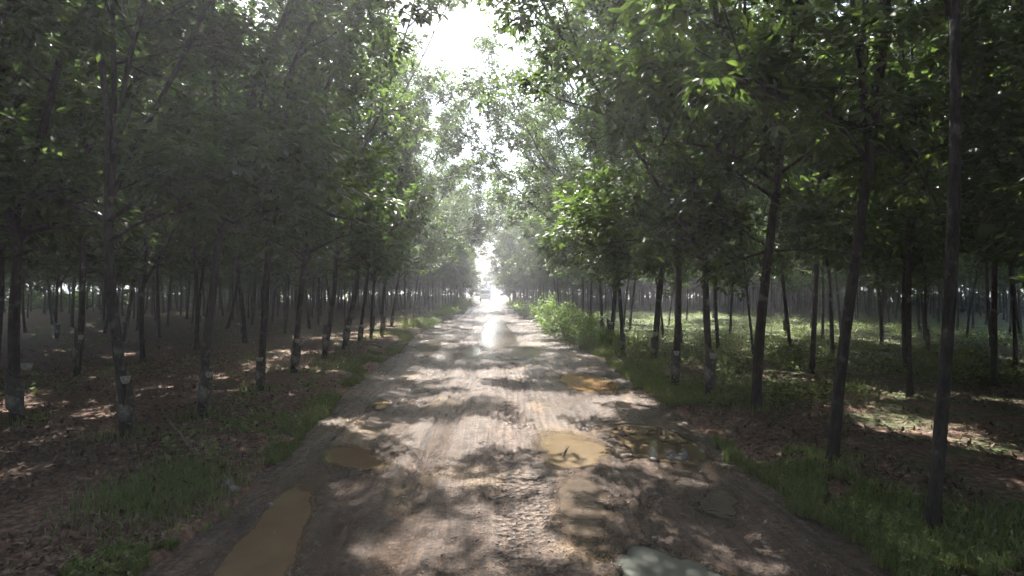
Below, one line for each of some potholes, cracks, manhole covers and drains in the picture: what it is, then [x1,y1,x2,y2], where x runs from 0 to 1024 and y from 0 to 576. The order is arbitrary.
pothole [480,317,519,352]
pothole [212,483,316,576]
pothole [610,423,711,466]
pothole [320,445,388,470]
pothole [370,400,390,409]
pothole [539,432,610,469]
pothole [559,373,620,393]
